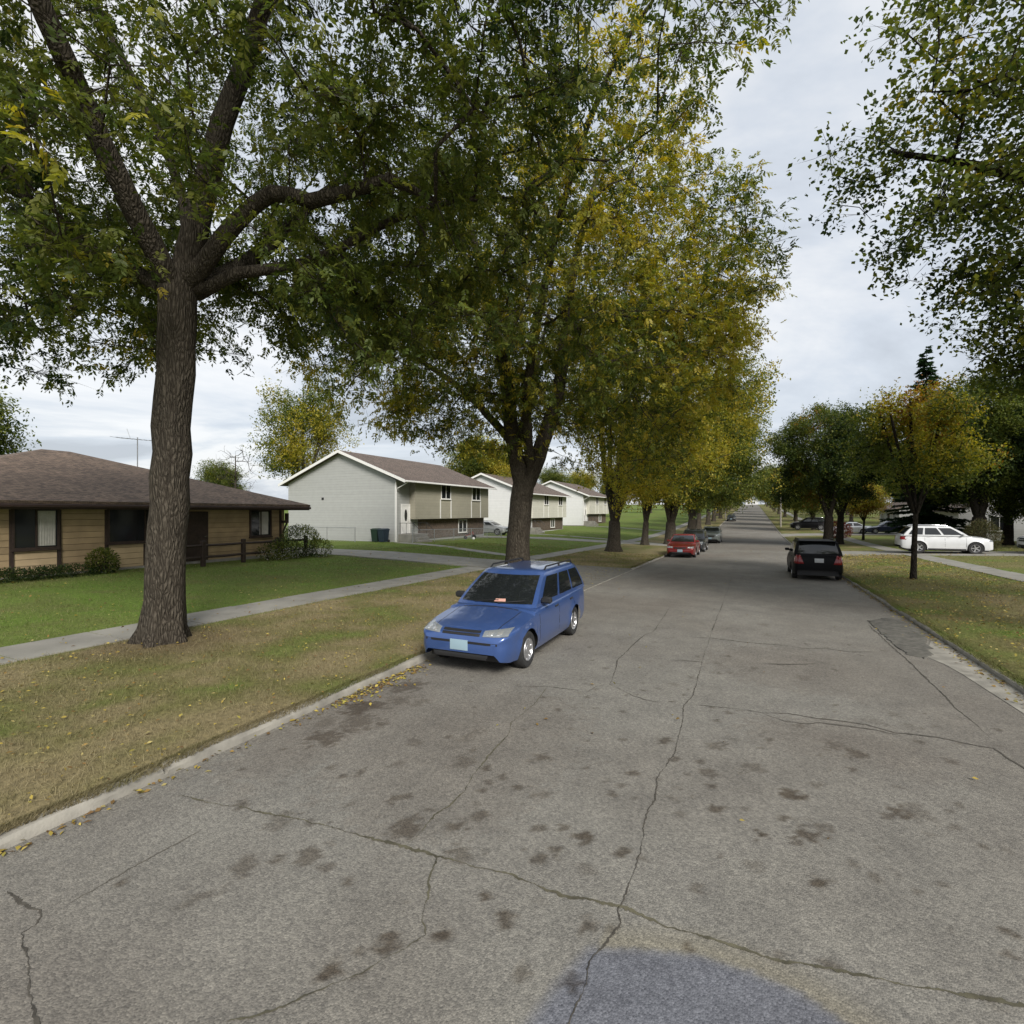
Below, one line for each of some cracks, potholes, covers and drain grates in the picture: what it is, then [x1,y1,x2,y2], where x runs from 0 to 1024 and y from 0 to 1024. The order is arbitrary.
crack [7,891,42,1024]
crack [183,584,1024,1024]
